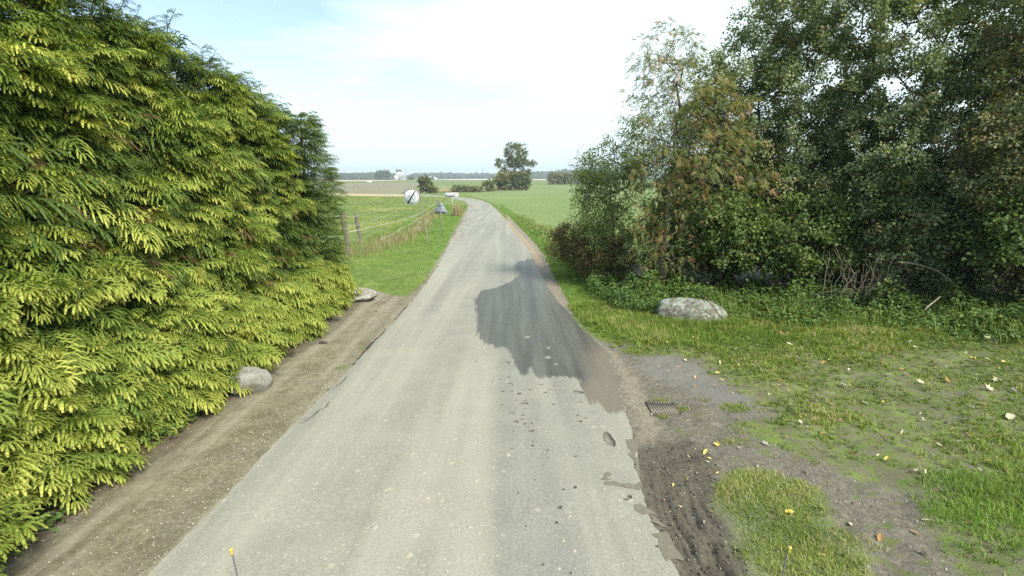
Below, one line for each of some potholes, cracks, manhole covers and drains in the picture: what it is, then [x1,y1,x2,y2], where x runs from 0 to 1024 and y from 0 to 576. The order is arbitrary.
pothole [603,431,616,447]
crack [301,304,421,423]
drain grate [645,401,680,416]
